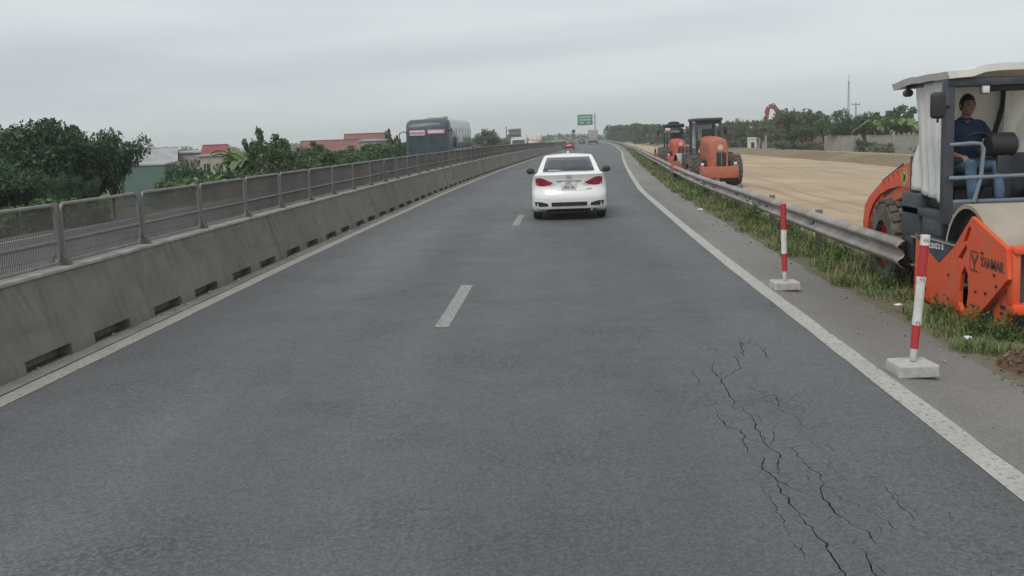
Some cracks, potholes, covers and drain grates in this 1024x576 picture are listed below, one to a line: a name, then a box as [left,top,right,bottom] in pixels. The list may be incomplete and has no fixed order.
crack [692,337,992,576]
